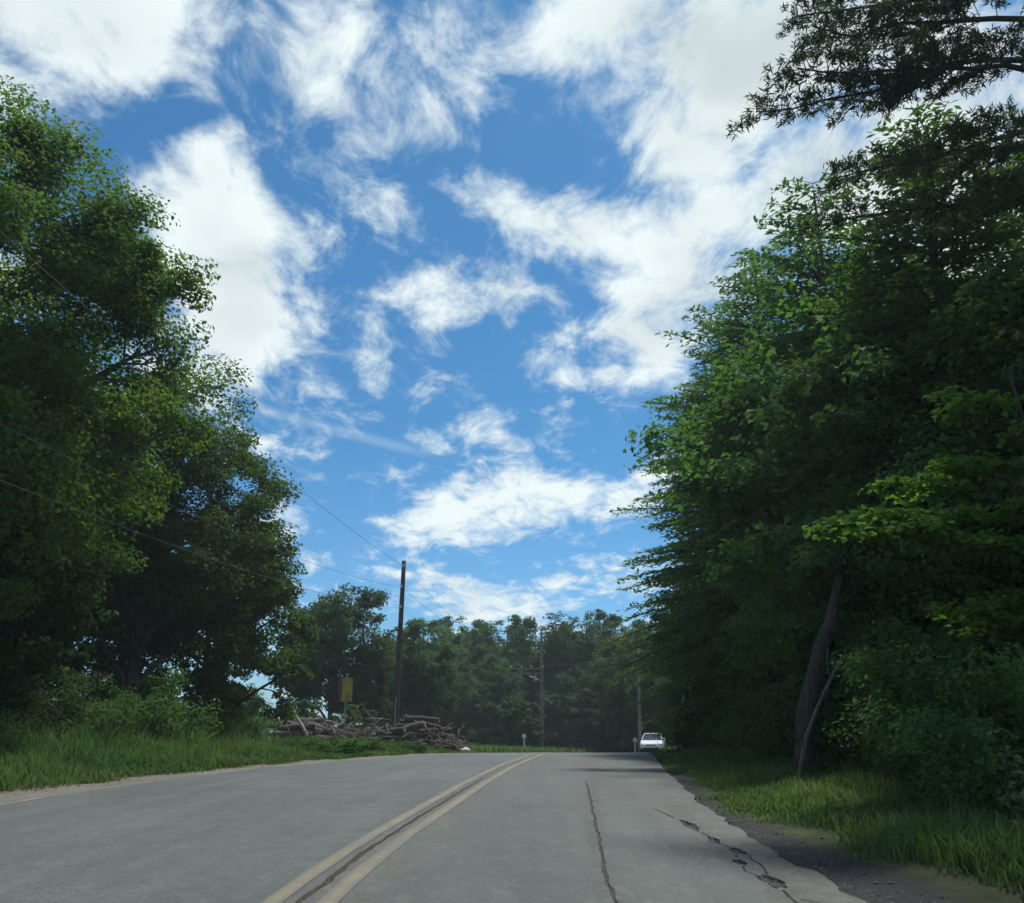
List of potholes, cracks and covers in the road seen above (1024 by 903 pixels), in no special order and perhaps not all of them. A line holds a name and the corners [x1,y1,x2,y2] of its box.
crack [653,808,819,903]
crack [585,781,619,903]
